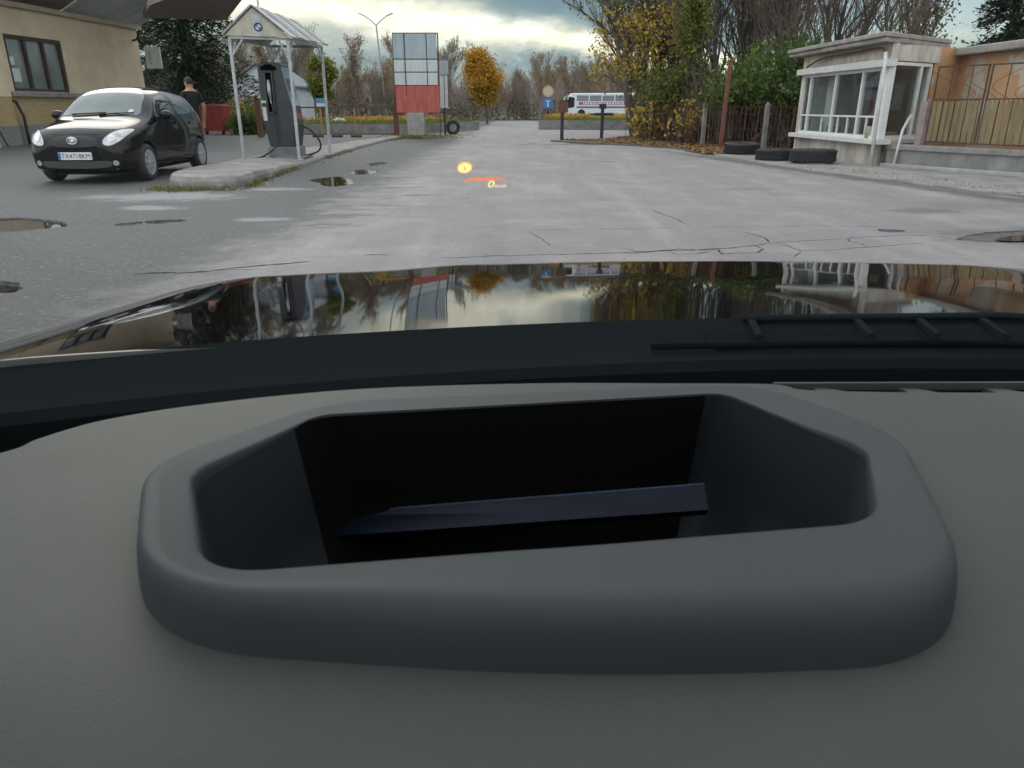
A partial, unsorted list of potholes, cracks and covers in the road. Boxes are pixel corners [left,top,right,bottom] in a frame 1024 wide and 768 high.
pothole [0,280,24,293]
pothole [309,176,355,187]
pothole [955,230,1024,243]
crack [444,211,964,258]
crack [132,261,309,275]
pothole [0,217,68,232]
